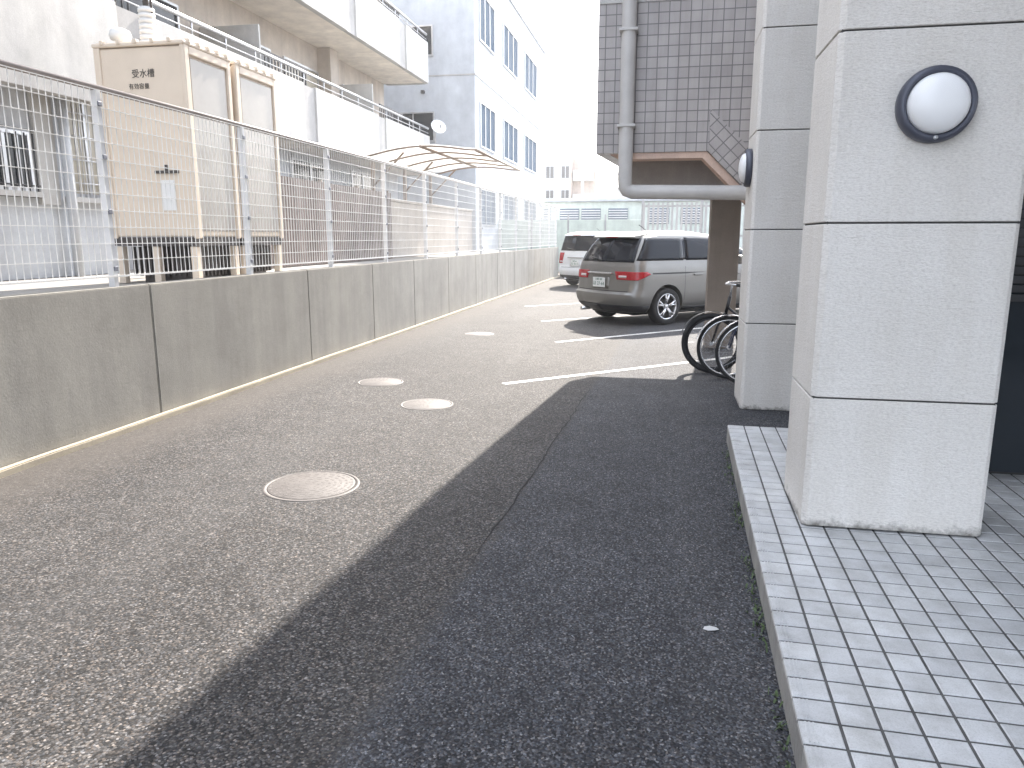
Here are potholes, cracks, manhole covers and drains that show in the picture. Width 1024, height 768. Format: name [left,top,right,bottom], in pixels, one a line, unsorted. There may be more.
crack [467,386,592,571]
manhole cover [358,378,403,386]
manhole cover [262,471,360,502]
manhole cover [400,398,453,410]
